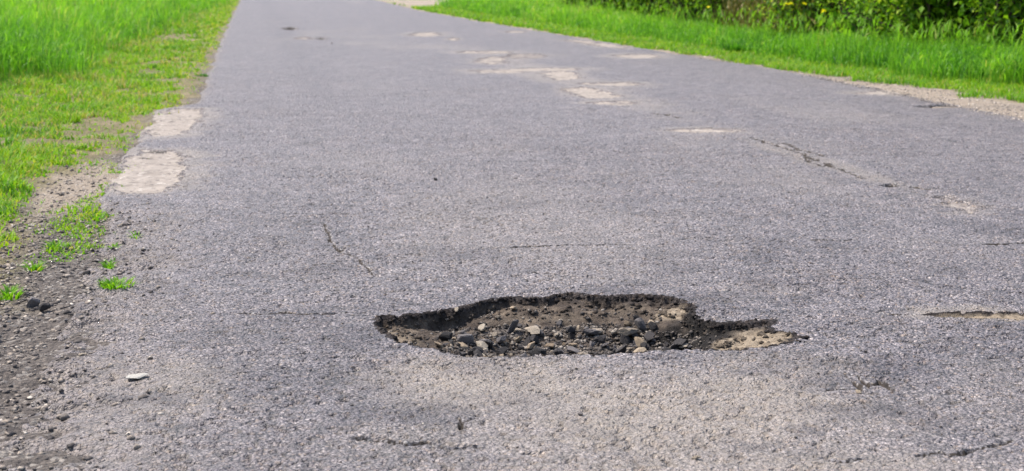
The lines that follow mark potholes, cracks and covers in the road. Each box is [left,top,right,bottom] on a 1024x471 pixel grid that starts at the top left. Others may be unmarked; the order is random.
pothole [370,291,810,358]
crack [349,416,485,451]
crack [320,223,375,276]
crack [748,137,935,191]
